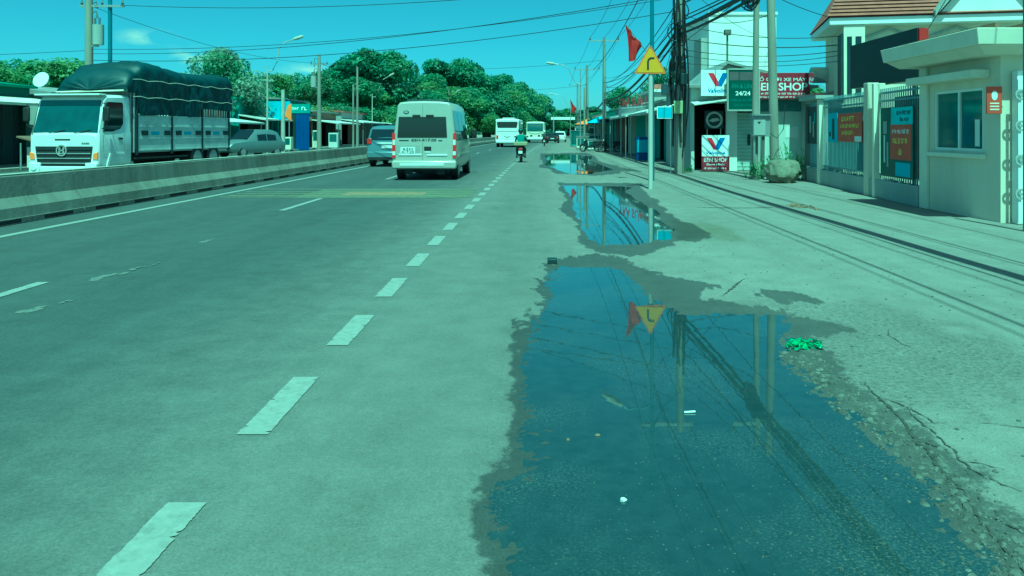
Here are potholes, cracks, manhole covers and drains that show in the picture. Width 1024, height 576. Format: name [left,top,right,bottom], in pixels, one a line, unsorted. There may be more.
pothole [477,265,1011,576]
crack [861,379,1024,571]
